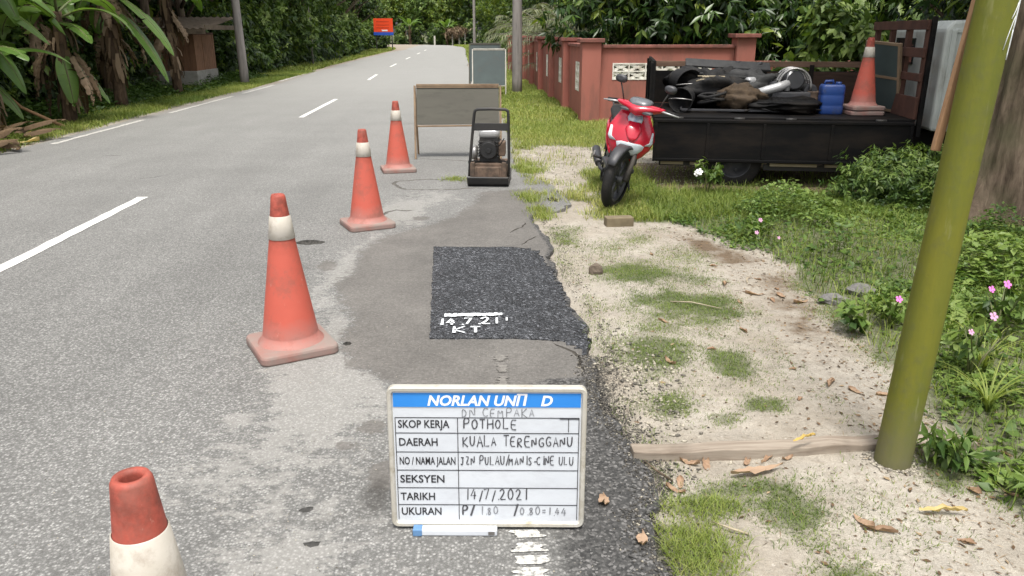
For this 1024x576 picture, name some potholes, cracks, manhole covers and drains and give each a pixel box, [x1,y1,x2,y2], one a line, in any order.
crack [383,179,471,215]
